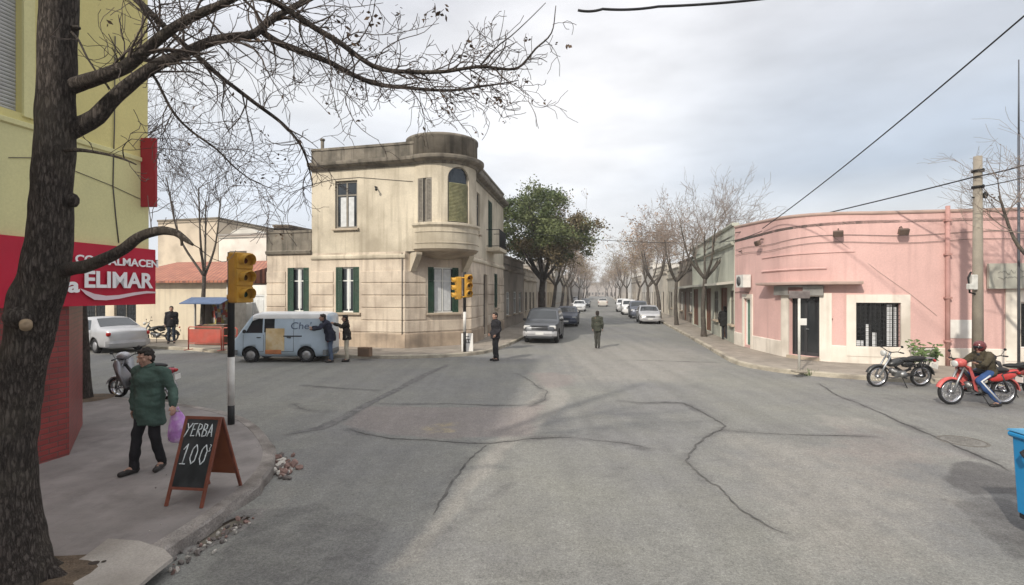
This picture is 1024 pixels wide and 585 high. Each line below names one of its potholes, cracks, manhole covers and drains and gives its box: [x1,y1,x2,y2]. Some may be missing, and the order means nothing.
crack [820,384,1006,469]
manhole cover [935,435,991,447]
crack [627,401,876,533]
crack [350,429,649,514]
